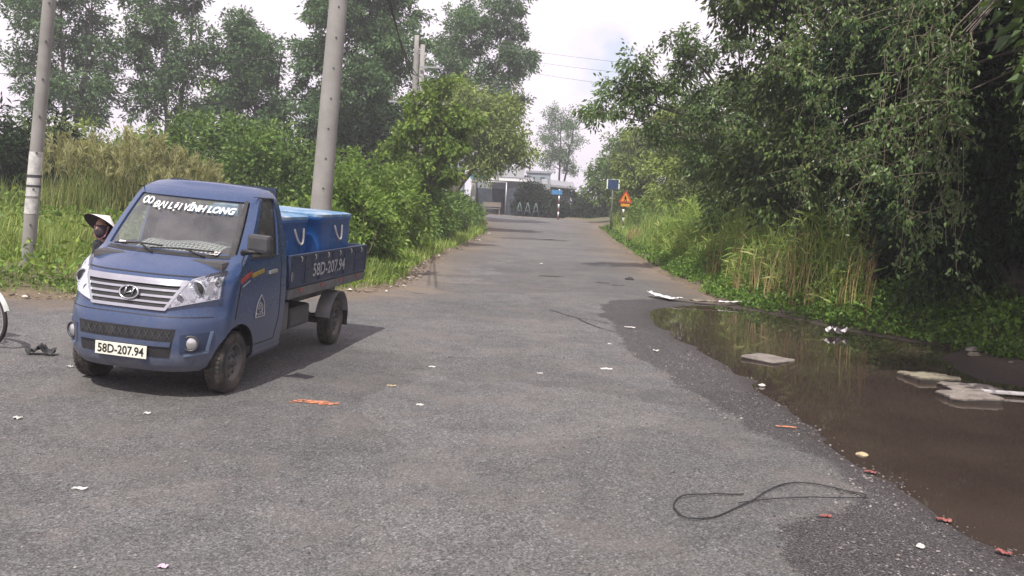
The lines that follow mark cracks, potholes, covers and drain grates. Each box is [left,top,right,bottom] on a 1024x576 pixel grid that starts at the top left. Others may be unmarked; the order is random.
crack [549,309,614,332]
